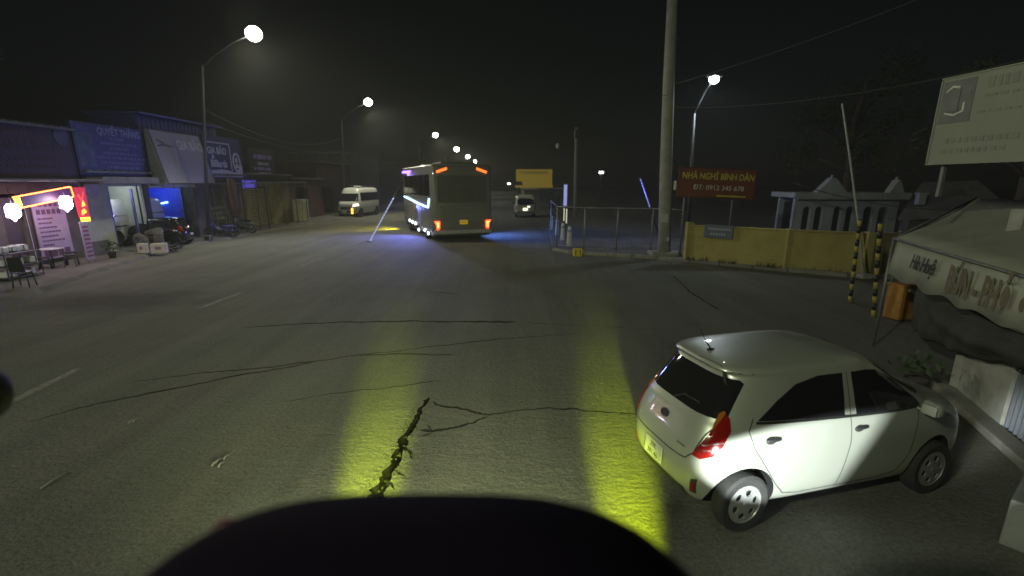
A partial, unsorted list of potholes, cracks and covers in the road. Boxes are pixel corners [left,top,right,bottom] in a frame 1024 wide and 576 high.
crack [290,381,636,494]
crack [25,320,656,423]
crack [672,275,719,310]
